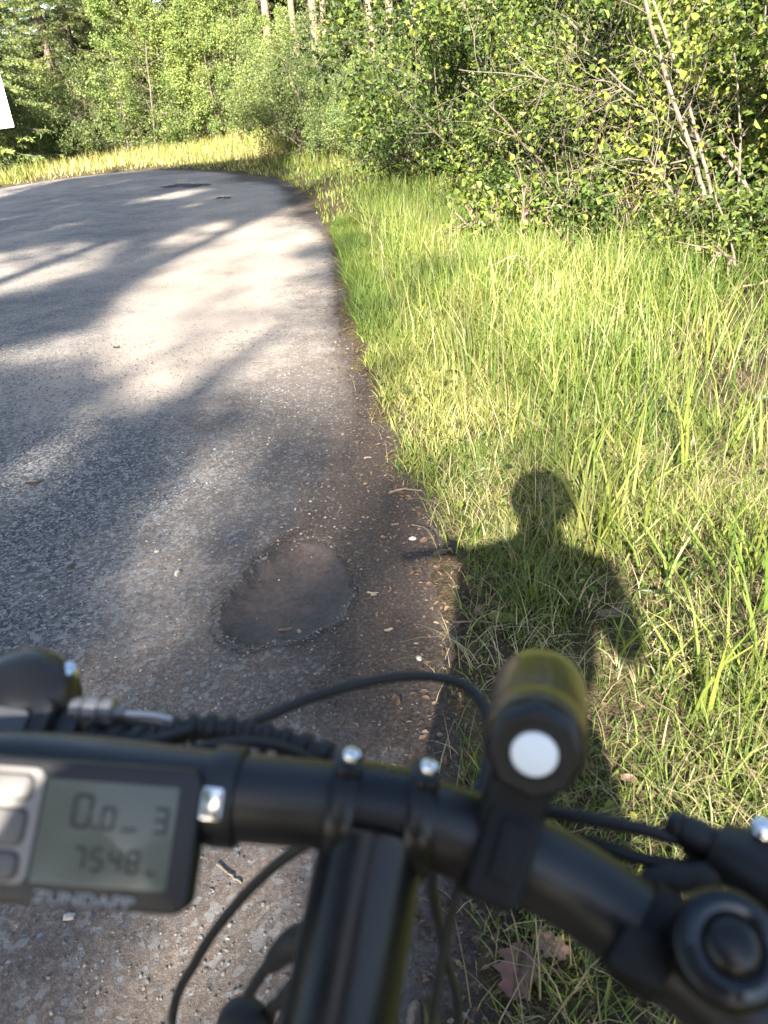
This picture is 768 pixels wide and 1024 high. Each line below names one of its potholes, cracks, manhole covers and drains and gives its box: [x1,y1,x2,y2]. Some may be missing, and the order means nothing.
pothole [209,539,359,652]
